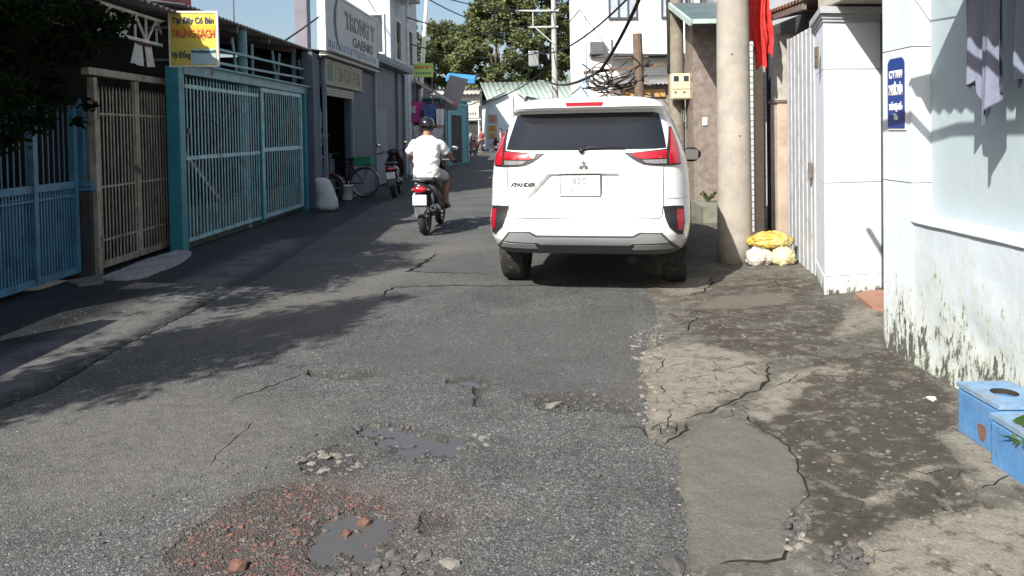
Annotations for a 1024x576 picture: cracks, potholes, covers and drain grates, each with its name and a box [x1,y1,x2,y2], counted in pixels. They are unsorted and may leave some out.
pothole [162,482,405,576]
crack [914,467,1009,489]
pothole [355,422,475,463]
pothole [413,506,461,537]
crack [230,375,300,401]
pothole [522,391,641,414]
pothole [296,444,374,477]
pothole [445,376,492,408]
crack [720,537,789,564]
crack [830,502,897,519]
crack [621,317,810,504]
